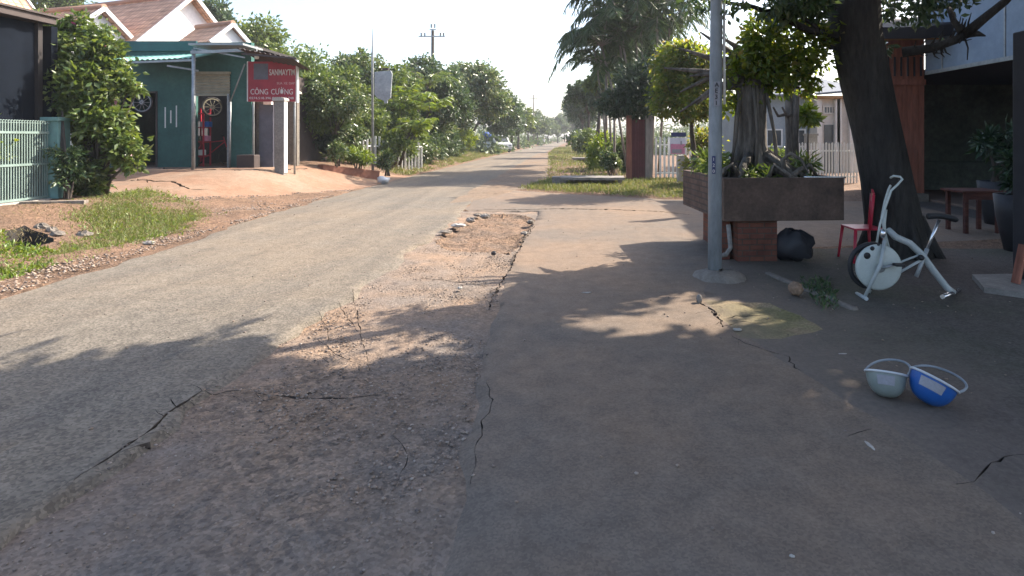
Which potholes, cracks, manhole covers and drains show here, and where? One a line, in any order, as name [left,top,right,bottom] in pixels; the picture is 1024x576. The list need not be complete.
crack [255,388,396,409]
crack [74,384,251,480]
crack [382,434,431,488]
crack [696,301,800,370]
crack [952,448,1024,485]
crack [130,167,307,190]
crack [488,226,535,310]
pothole [435,213,536,255]
crack [314,292,370,370]
crack [470,379,495,484]
